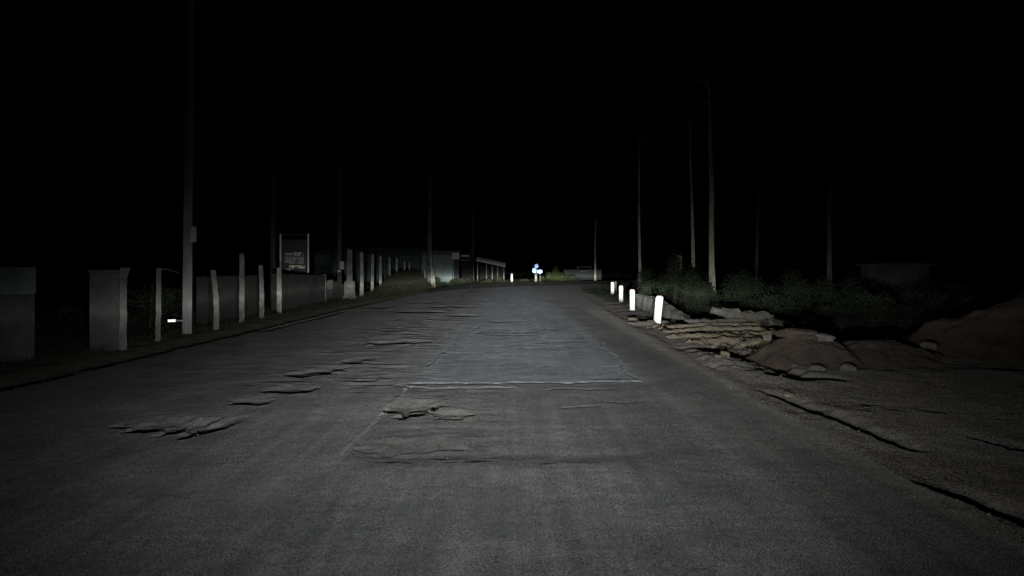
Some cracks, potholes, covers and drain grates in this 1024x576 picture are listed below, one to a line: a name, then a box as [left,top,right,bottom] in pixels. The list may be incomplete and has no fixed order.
pothole [228,396,279,406]
pothole [260,382,327,394]
pothole [384,396,452,420]
crack [903,475,1023,528]
pothole [108,412,225,438]
pothole [283,364,361,378]
pothole [429,407,483,421]
crack [955,433,1023,452]
